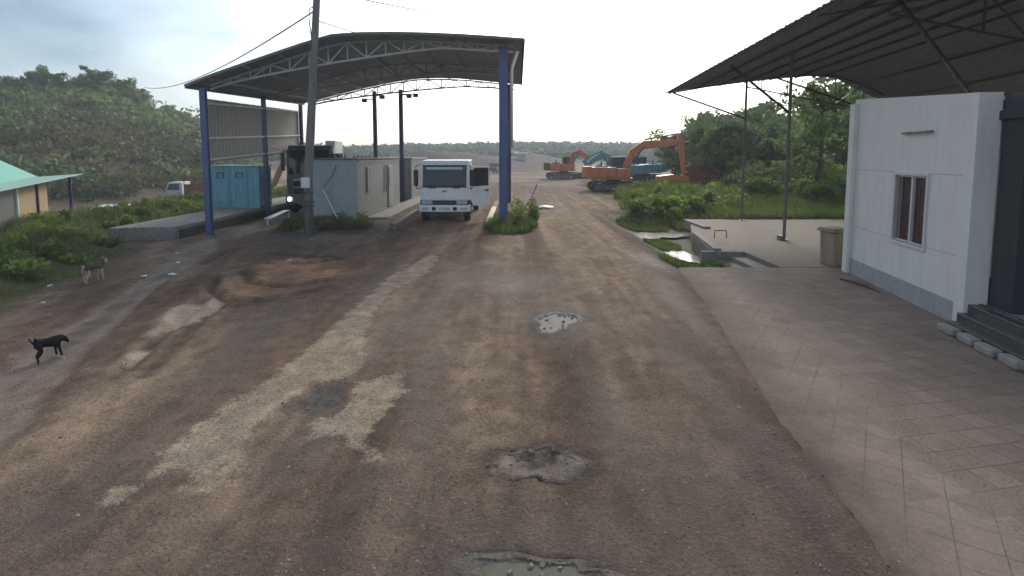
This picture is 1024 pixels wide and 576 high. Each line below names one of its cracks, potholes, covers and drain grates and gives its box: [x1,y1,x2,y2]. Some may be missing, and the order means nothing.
pothole [483,443,598,485]
pothole [532,310,588,337]
pothole [448,551,628,576]
